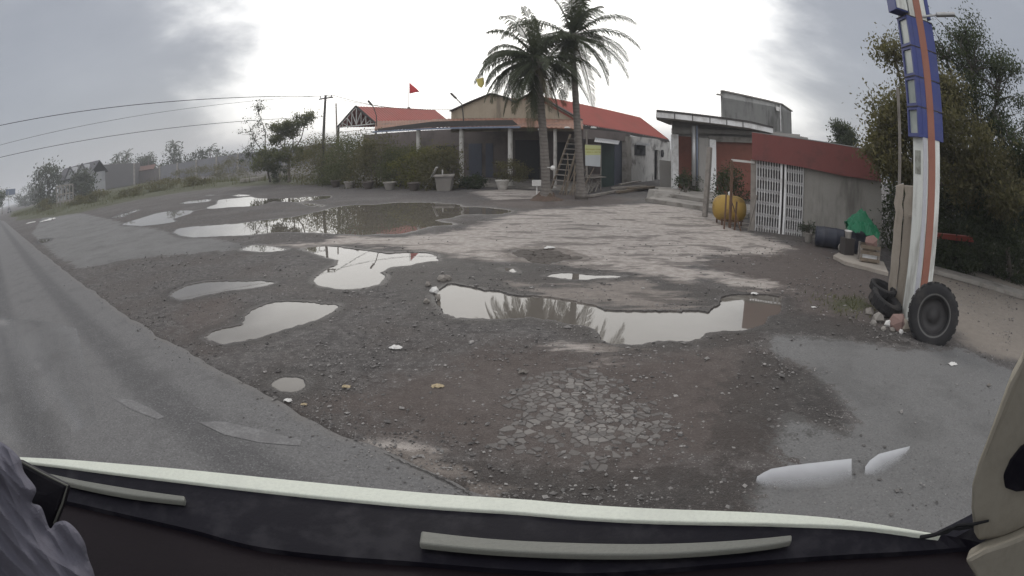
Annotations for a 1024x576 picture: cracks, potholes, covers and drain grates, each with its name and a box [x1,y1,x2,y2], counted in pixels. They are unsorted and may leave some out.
pothole [123,210,193,226]
pothole [174,202,512,237]
pothole [241,244,289,252]
pothole [170,280,276,300]
pothole [546,272,627,280]
pothole [301,245,439,289]
pothole [205,301,340,344]
pothole [207,196,331,209]
pothole [270,376,307,392]
pothole [433,283,783,345]
